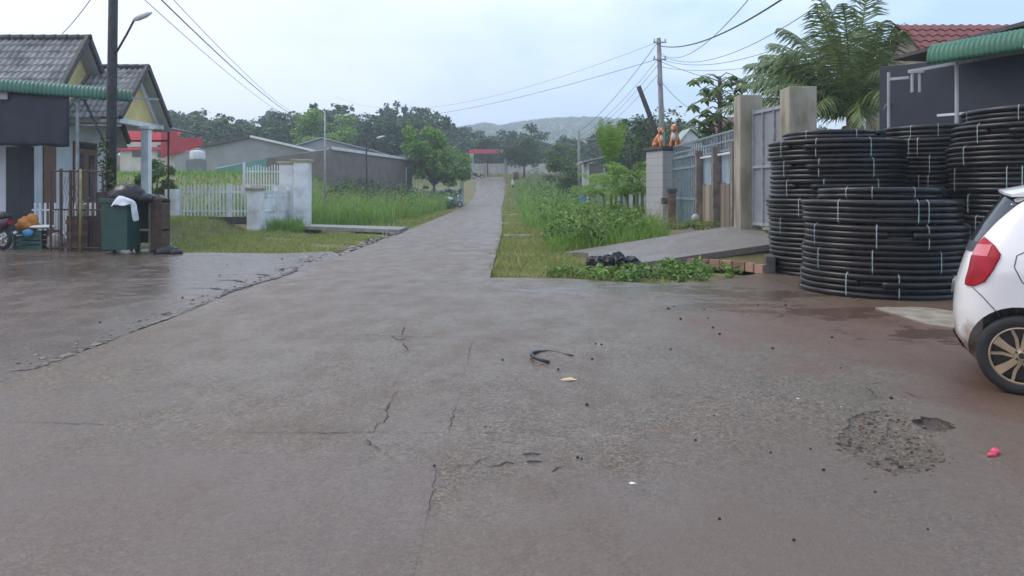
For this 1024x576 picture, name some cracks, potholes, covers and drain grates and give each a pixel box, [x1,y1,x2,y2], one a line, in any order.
pothole [822,407,963,484]
